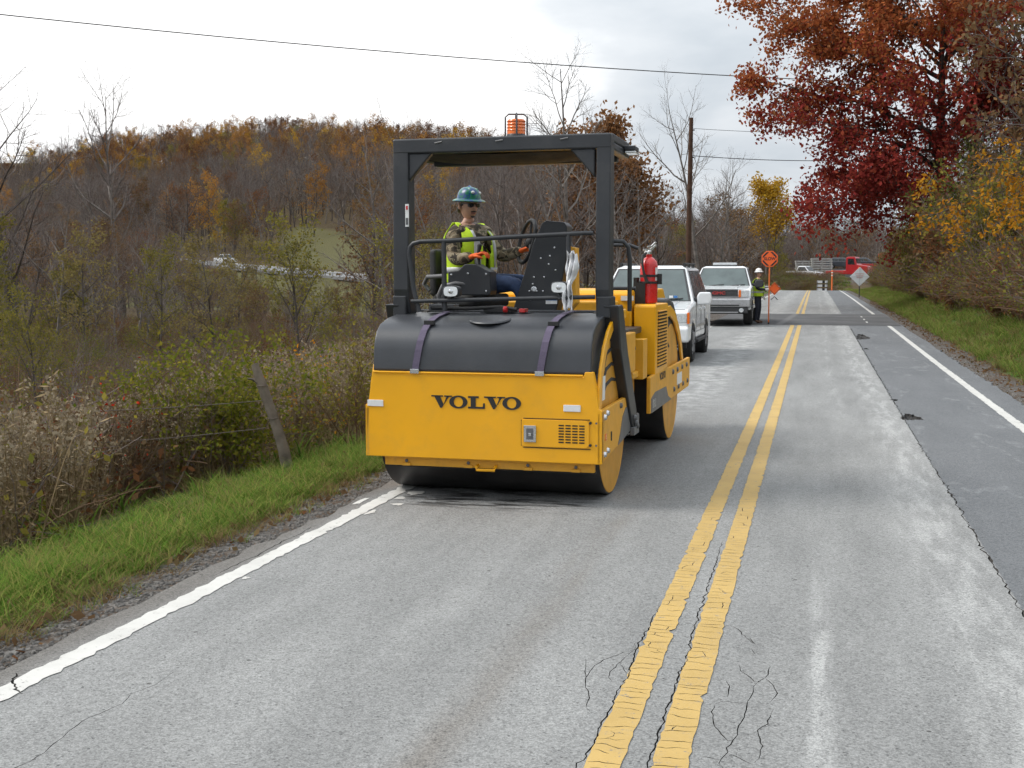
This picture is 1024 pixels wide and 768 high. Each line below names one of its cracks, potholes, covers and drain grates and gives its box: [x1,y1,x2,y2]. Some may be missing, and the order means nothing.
crack [576,509,778,768]
crack [15,672,173,768]
